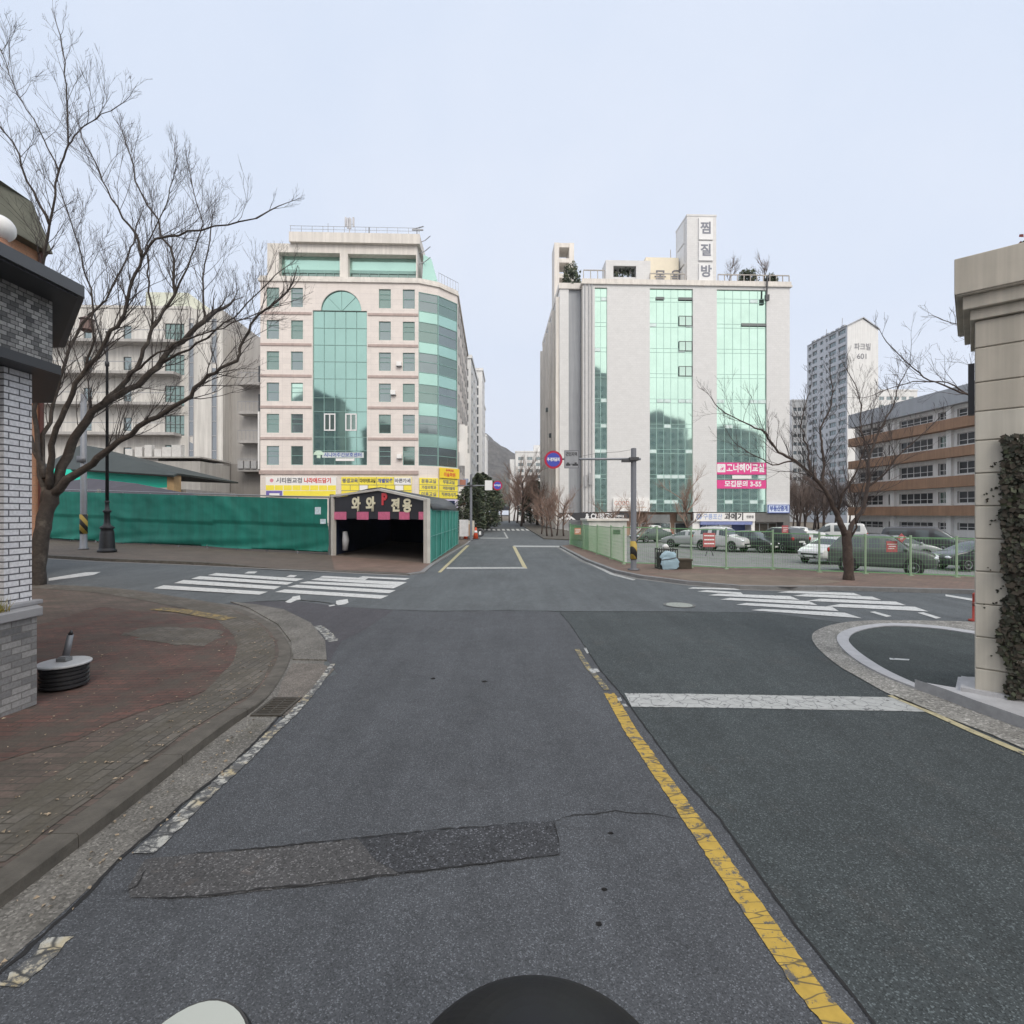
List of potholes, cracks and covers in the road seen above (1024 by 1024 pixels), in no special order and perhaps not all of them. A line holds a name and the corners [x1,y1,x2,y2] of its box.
drain grate [250,697,302,716]
crack [119,810,679,899]
